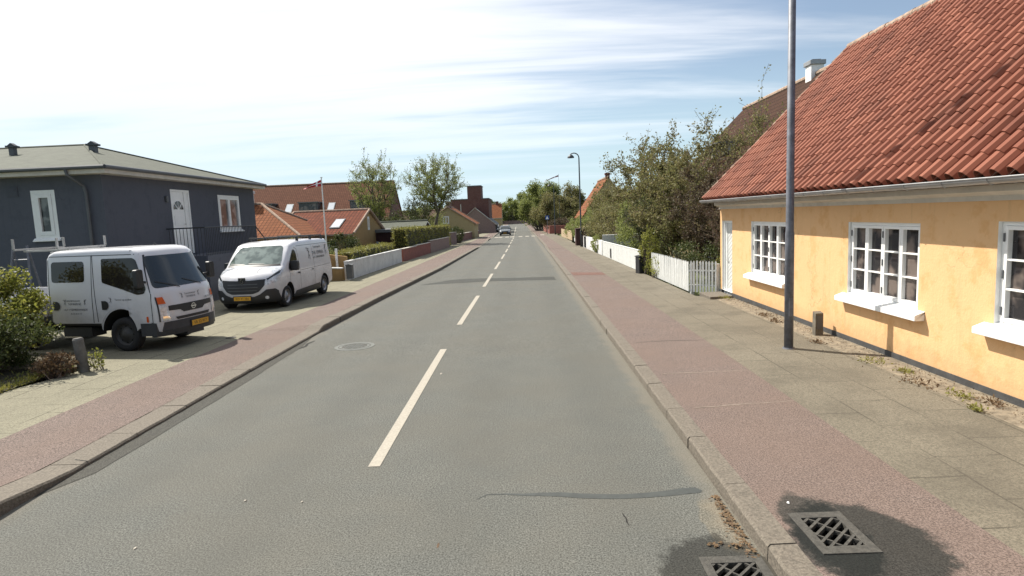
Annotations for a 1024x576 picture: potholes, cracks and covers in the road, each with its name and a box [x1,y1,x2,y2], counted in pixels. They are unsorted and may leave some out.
manhole cover [334,342,375,351]
drain grate [699,555,774,576]
drain grate [787,511,883,555]
